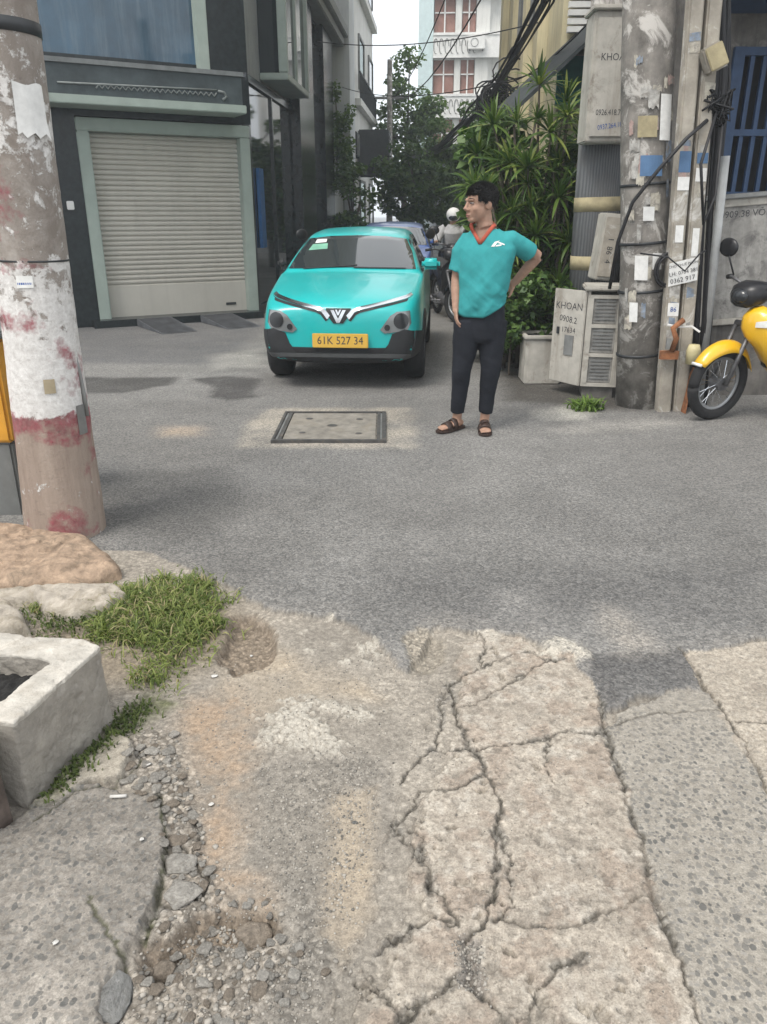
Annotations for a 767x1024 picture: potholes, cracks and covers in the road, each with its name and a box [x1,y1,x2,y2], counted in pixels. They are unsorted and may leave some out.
crack [86,793,211,975]
pothole [213,613,281,678]
crack [353,632,767,1024]
manhole cover [271,411,386,444]
pothole [136,897,285,983]
